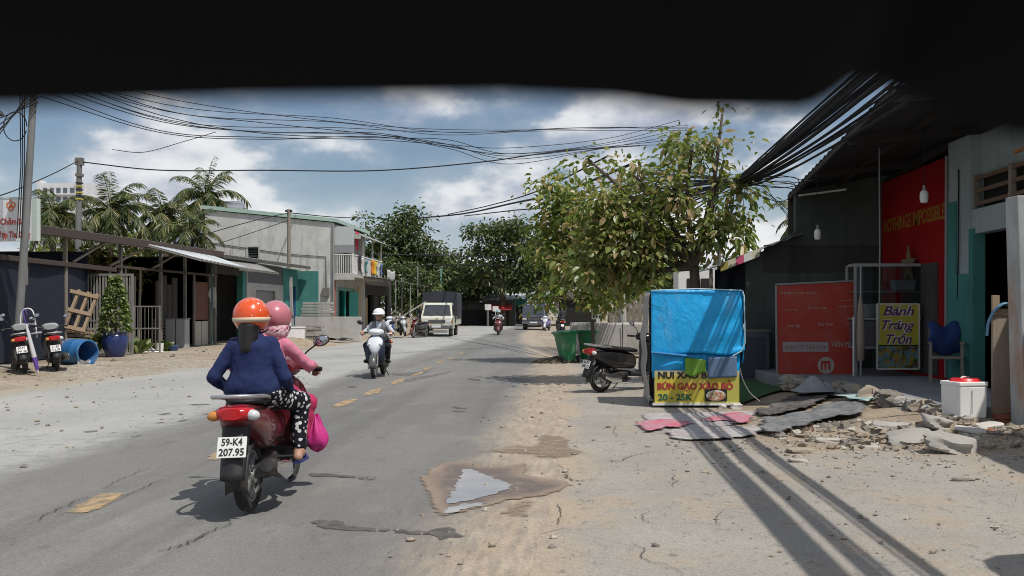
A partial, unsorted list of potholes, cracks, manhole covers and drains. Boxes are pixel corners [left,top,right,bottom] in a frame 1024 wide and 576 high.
pothole [420,460,573,515]
crack [35,468,159,521]
crack [159,521,232,550]
